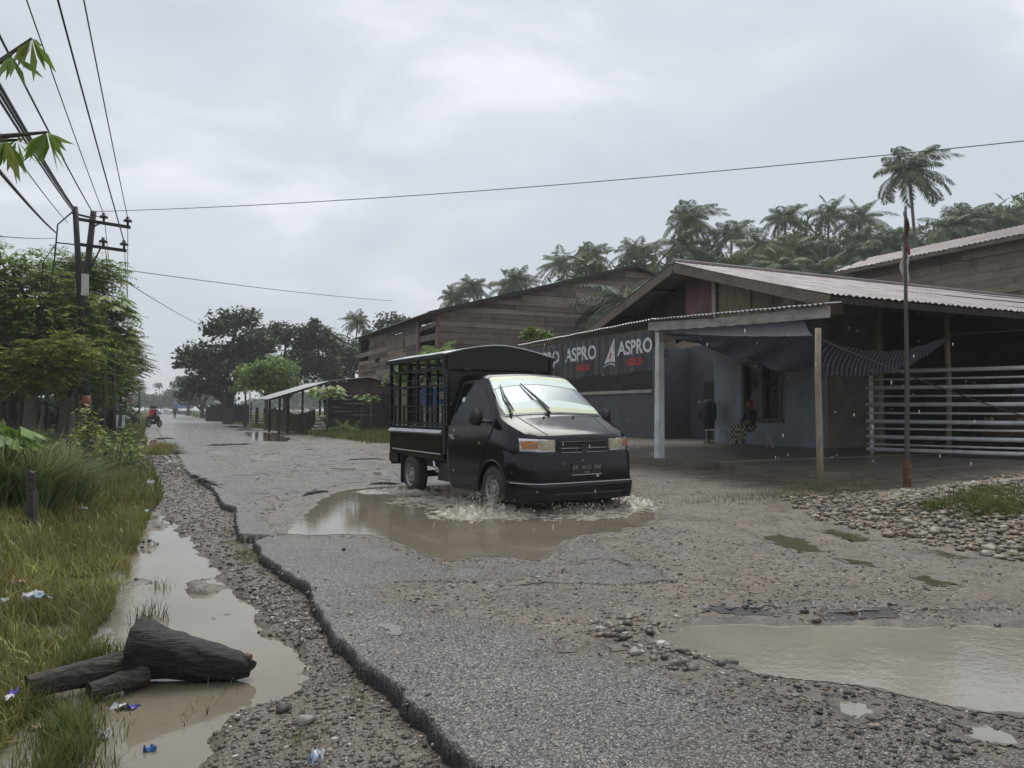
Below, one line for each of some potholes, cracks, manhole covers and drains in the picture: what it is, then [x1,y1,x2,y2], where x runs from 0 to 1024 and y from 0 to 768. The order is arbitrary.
pothole [276,484,676,562]
pothole [952,716,1024,749]
pothole [643,614,1024,718]
pothole [827,554,883,568]
pothole [810,527,883,542]
pothole [749,532,835,553]
crack [187,474,227,488]
pothole [908,574,958,587]
pothole [824,696,896,728]
pothole [242,431,293,442]
